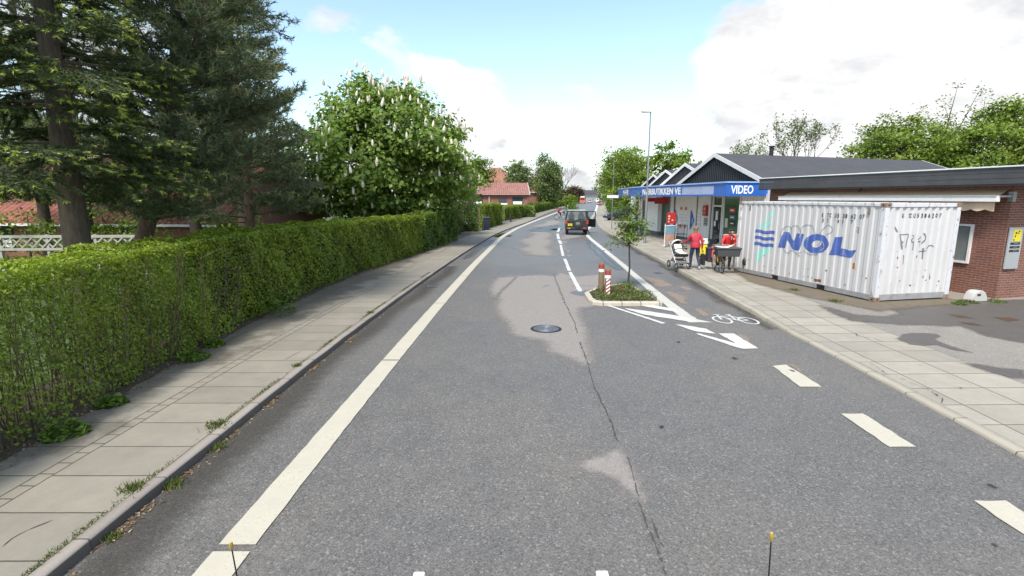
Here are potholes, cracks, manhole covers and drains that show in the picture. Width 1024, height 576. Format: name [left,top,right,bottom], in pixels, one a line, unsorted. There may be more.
crack [544,276,618,440]
manhole cover [530,325,562,333]
crack [627,457,666,573]
